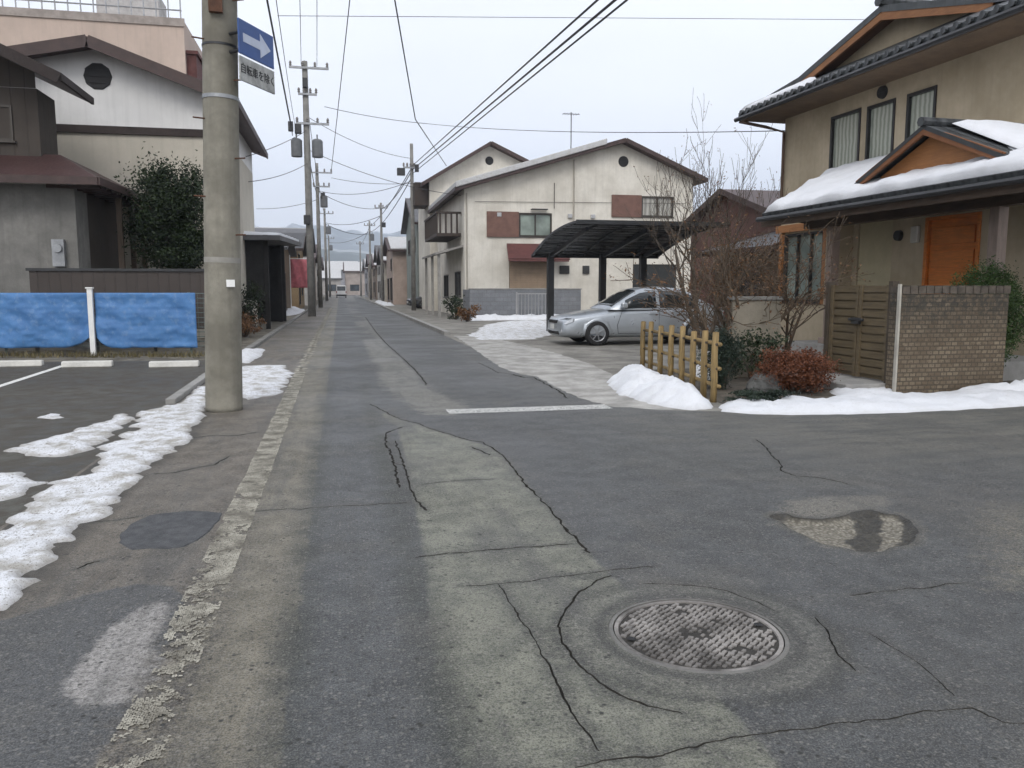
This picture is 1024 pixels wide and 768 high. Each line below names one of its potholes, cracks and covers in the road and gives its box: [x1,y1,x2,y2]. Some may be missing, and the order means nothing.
manhole cover [608,598,790,674]
crack [473,566,1024,768]
crack [243,427,486,512]
crack [755,439,849,485]
pothole [769,510,919,552]
